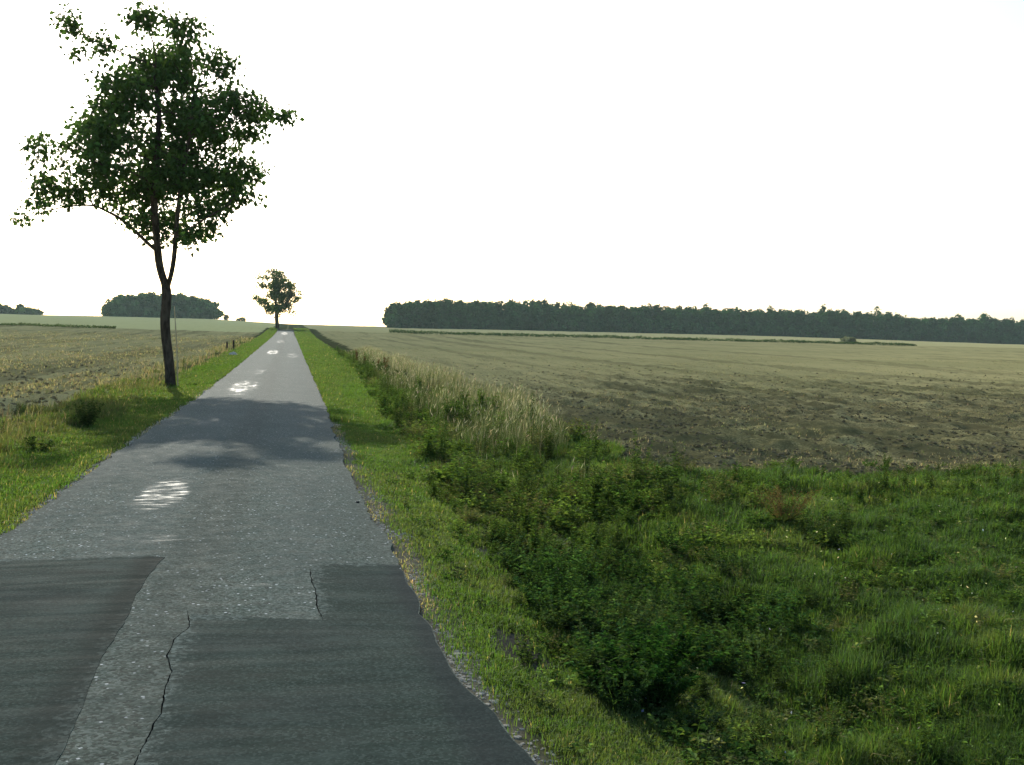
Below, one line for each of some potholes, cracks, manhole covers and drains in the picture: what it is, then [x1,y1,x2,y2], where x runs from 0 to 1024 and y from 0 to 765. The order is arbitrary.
crack [134,609,190,765]
crack [310,571,323,620]
